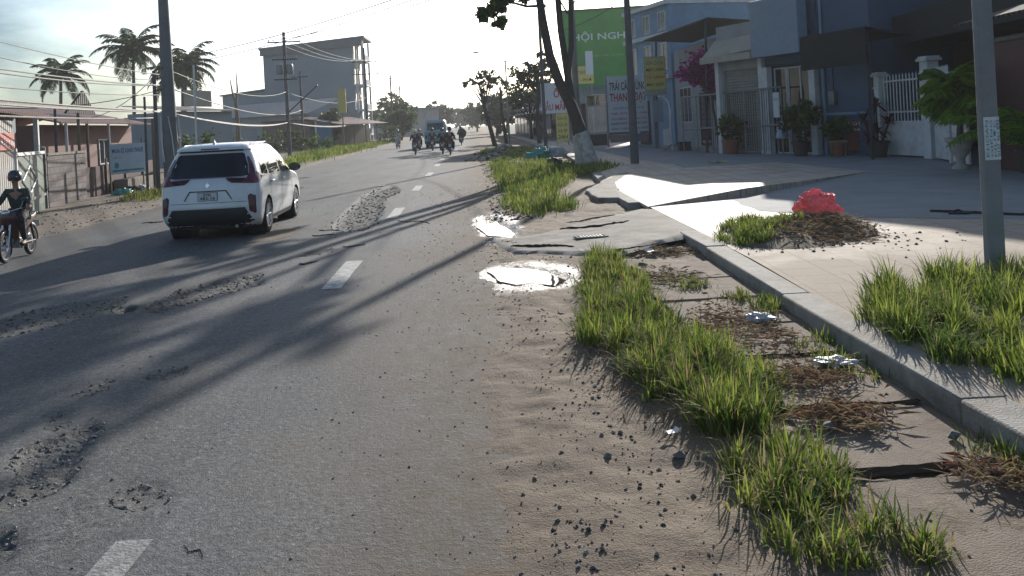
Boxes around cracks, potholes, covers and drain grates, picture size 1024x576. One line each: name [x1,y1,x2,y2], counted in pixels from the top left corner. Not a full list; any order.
pothole [71,378,118,399]
pothole [0,417,106,512]
pothole [0,526,22,567]
pothole [146,366,189,381]
crack [512,214,658,250]
pothole [0,296,128,339]
pothole [331,185,400,232]
pothole [108,482,172,513]
pothole [111,305,137,315]
pothole [141,273,264,314]
